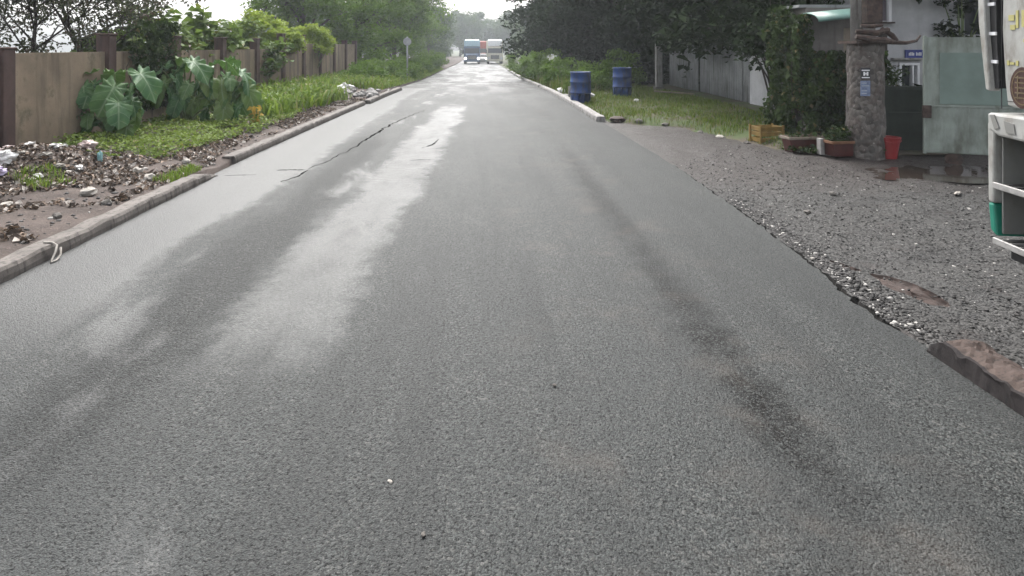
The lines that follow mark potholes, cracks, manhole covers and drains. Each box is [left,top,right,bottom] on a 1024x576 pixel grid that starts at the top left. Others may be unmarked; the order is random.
pothole [869,273,950,307]
crack [281,112,419,182]
